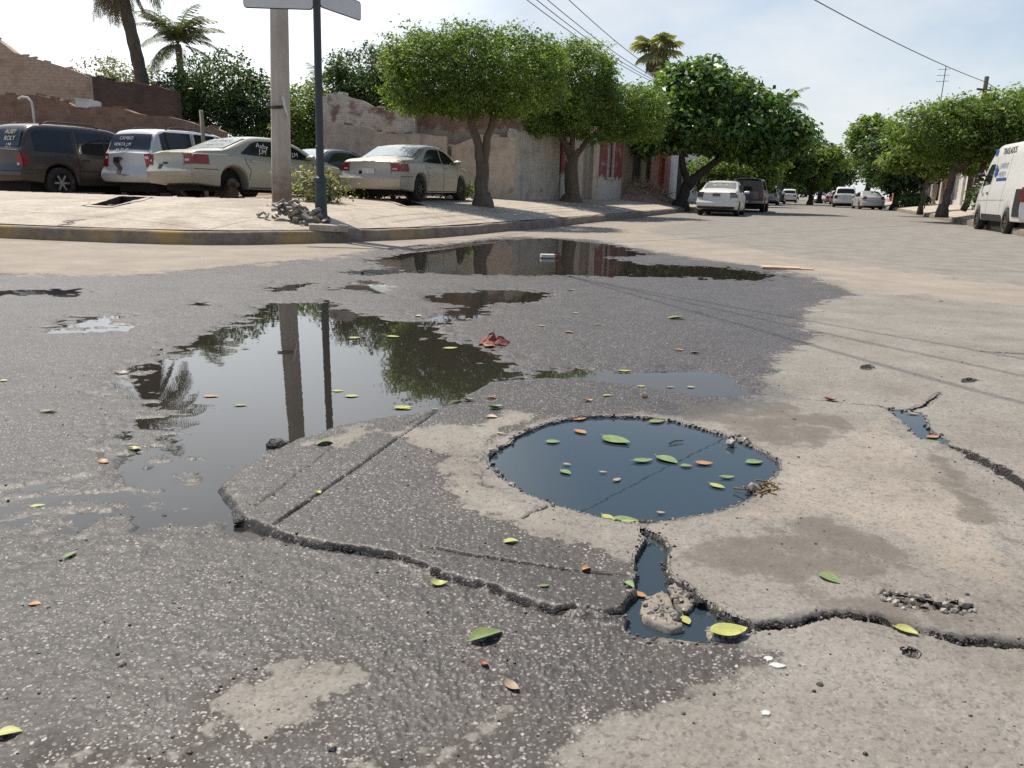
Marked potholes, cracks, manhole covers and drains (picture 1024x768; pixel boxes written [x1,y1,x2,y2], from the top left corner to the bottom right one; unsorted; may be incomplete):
crack [943,444,1024,492]
crack [745,611,1024,650]
crack [904,392,943,412]
crack [265,533,611,616]
pothole [484,414,783,529]
pothole [877,587,979,616]
pothole [600,519,757,645]
